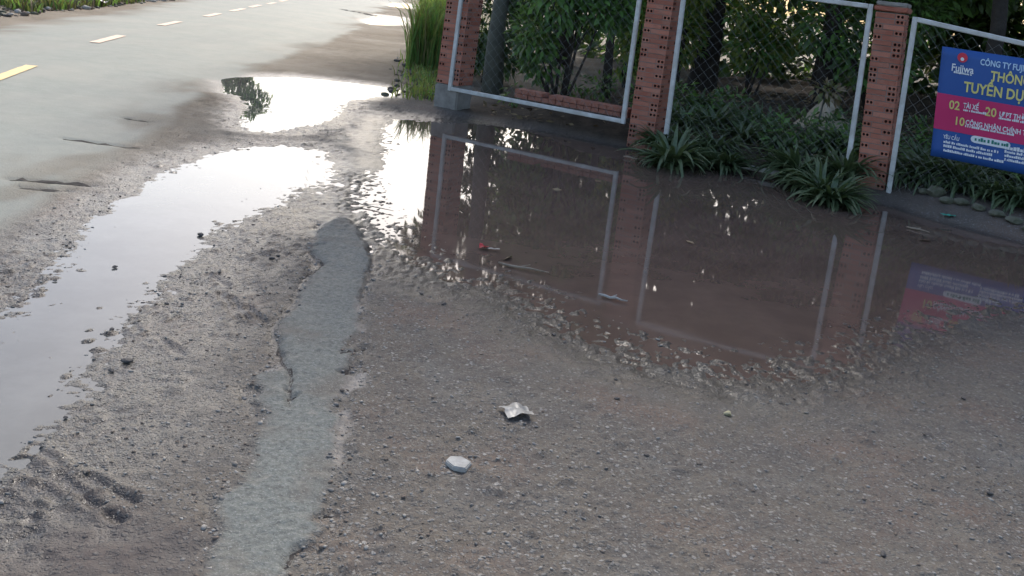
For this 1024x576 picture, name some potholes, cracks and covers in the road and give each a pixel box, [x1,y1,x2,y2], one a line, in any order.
crack [63,139,136,148]
crack [10,177,90,191]
pothole [0,144,335,489]
pothole [219,76,401,134]
